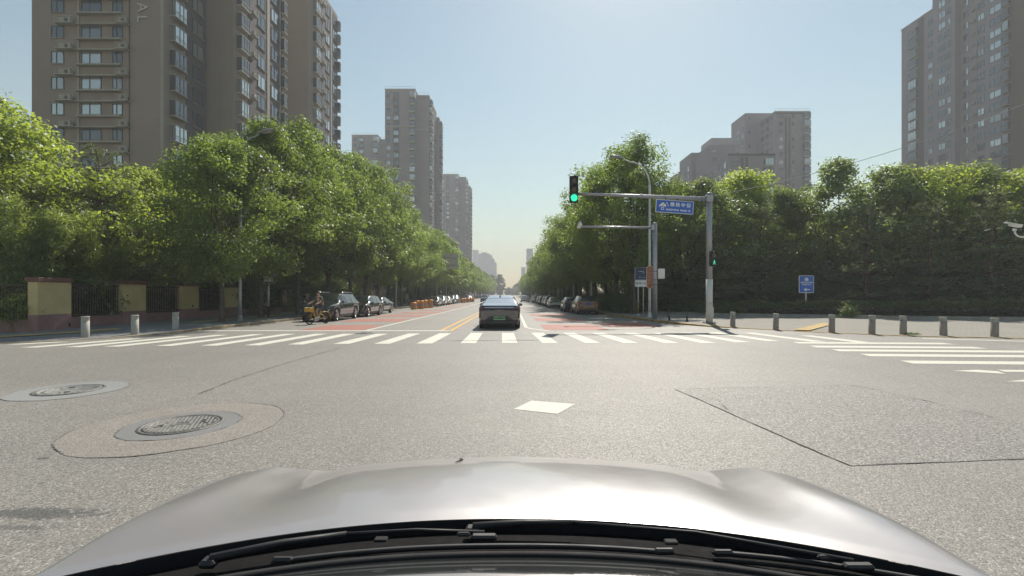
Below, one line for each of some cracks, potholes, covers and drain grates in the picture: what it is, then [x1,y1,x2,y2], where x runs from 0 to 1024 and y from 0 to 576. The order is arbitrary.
manhole cover [0,381,130,401]
manhole cover [52,403,285,458]
